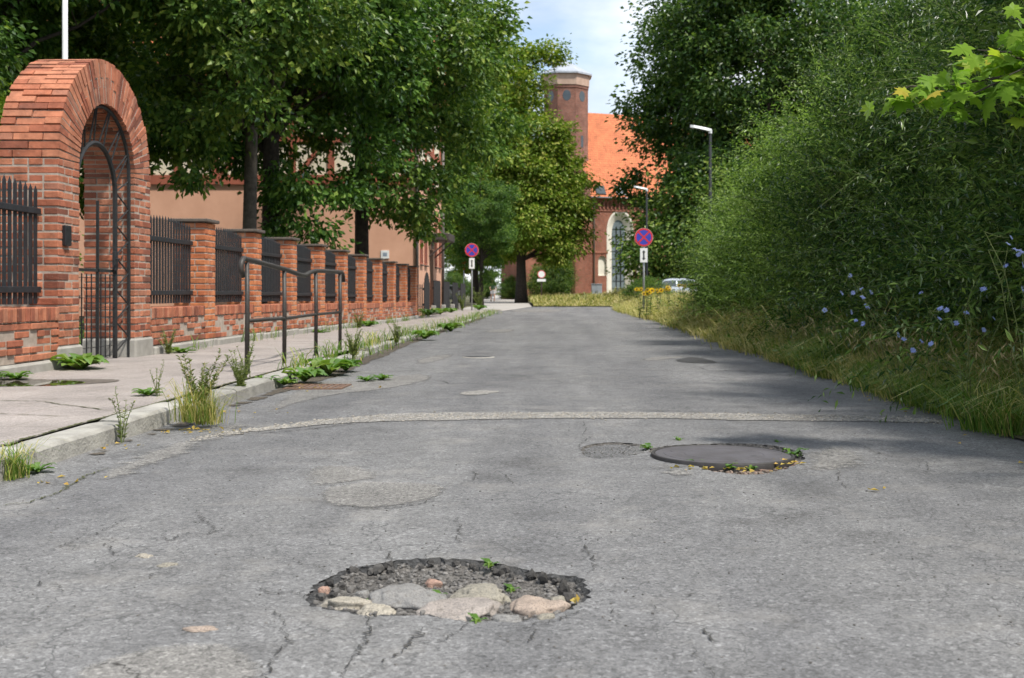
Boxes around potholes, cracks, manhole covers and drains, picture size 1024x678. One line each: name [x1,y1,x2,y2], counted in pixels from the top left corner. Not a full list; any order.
crack [522,610,581,641]
crack [256,588,307,678]
manhole cover [651,445,795,472]
pothole [305,557,591,622]
crack [580,537,620,615]
crack [692,626,715,676]
crack [341,612,469,676]
crack [5,470,99,505]
crack [161,510,225,540]
